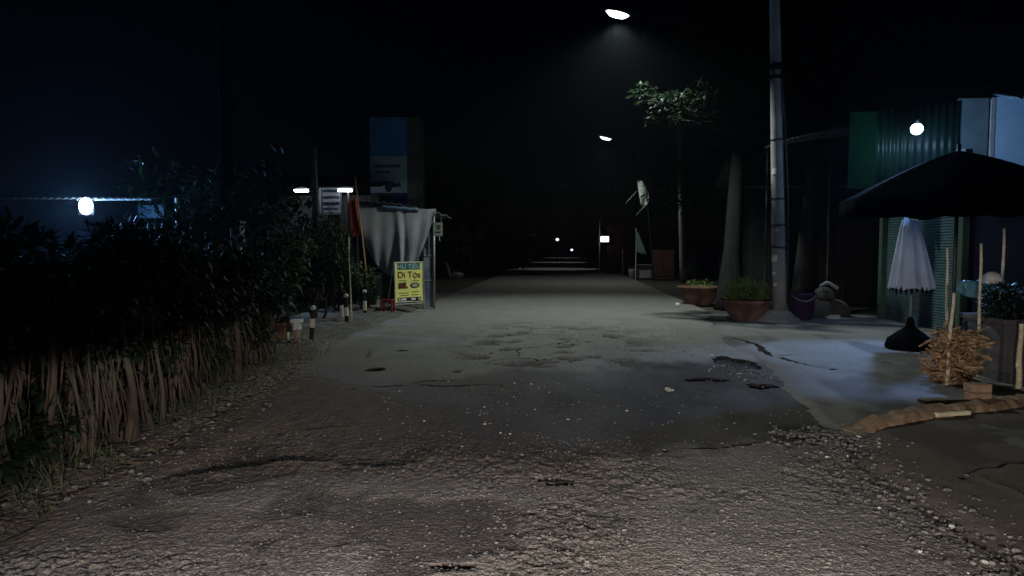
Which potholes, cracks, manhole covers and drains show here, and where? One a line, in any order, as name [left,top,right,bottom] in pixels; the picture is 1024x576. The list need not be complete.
pothole [409,552,500,576]
crack [355,326,611,390]
pothole [355,365,395,374]
crack [949,458,1024,510]
crack [723,336,833,370]
pothole [736,382,784,392]
pothole [704,354,772,372]
pothole [517,469,594,493]
pothole [674,376,740,385]
